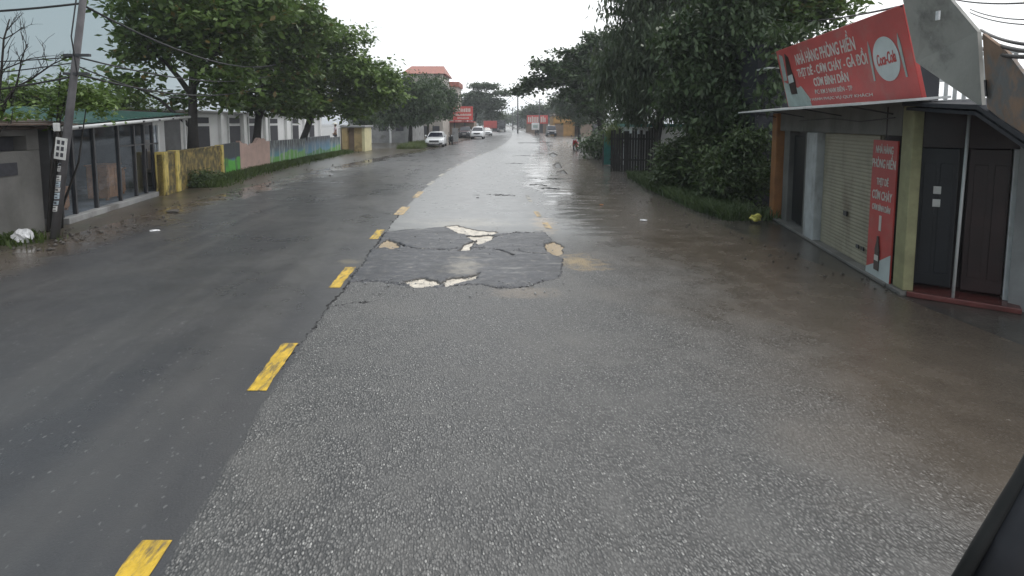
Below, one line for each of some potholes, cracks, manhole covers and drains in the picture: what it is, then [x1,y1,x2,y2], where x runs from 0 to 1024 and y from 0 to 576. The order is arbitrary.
pothole [403,278,442,288]
pothole [376,239,401,249]
pothole [466,235,495,245]
crack [281,215,417,370]
pothole [442,273,480,287]
pothole [445,225,498,236]
pothole [544,242,565,256]
